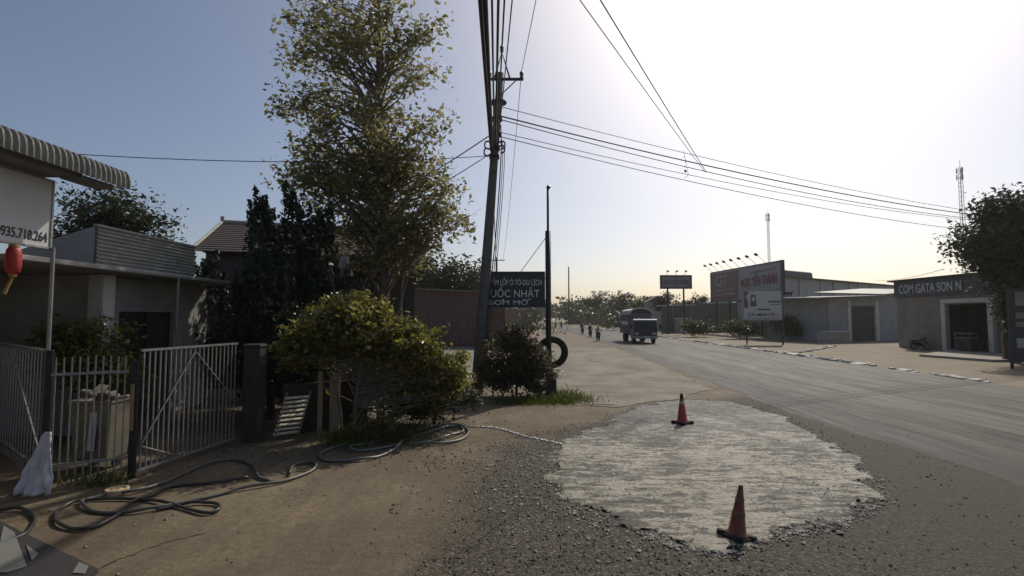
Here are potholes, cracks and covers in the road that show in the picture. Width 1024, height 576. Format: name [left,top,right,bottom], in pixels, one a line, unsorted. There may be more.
crack [98,533,204,570]
